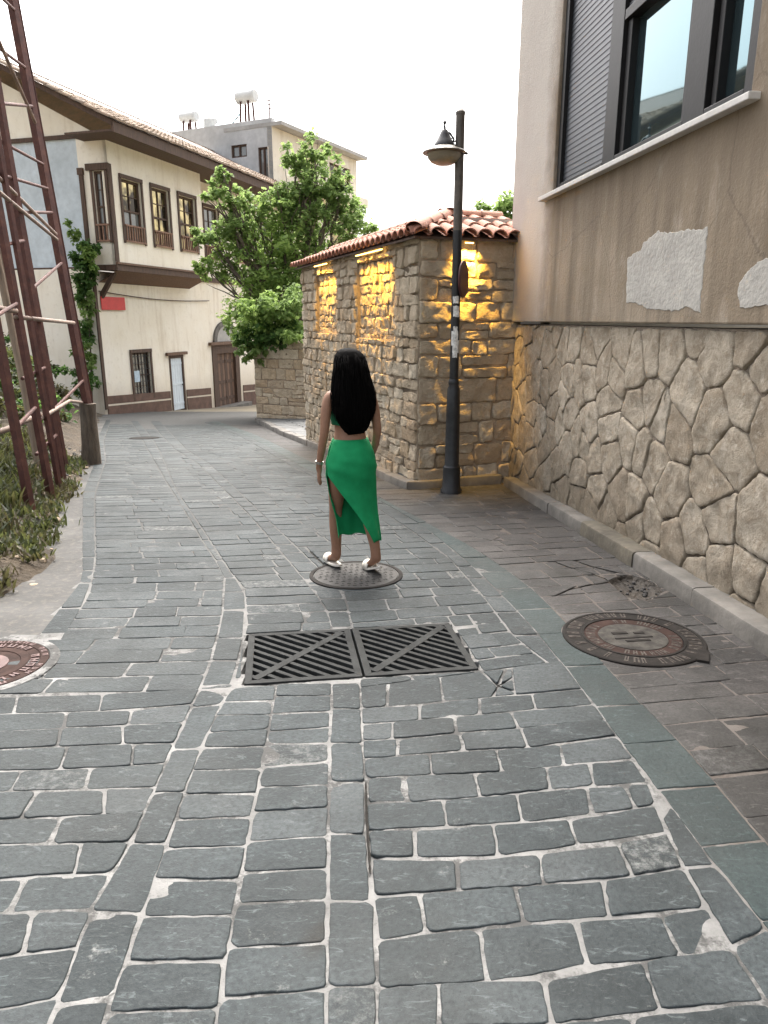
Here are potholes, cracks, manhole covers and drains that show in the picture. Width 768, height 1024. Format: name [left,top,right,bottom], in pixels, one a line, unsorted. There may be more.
drain grate [244,628,363,686]
pothole [608,575,662,601]
crack [554,561,609,596]
manhole cover [309,561,403,590]
drain grate [352,623,478,677]
manhole cover [0,637,60,691]
manhole cover [562,612,709,668]
